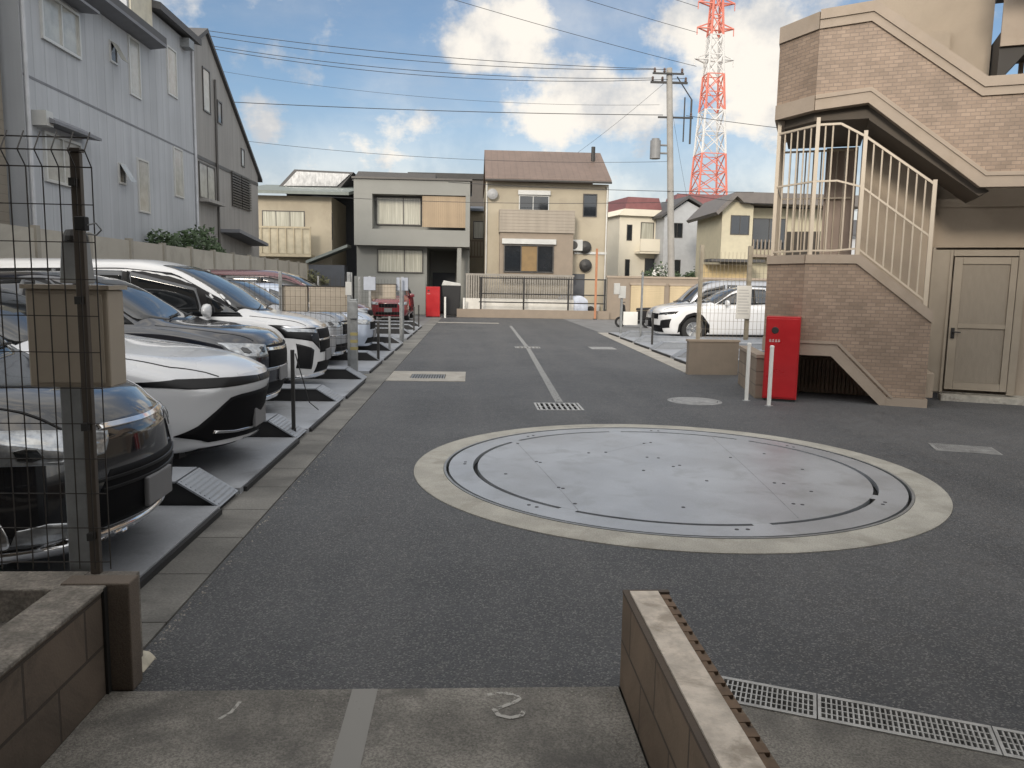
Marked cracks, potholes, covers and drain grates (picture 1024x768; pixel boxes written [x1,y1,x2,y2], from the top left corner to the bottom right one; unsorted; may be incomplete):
drain grate [992,726,1024,761]
manhole cover [667,397,722,405]
drain grate [722,676,817,720]
drain grate [817,694,1003,756]
